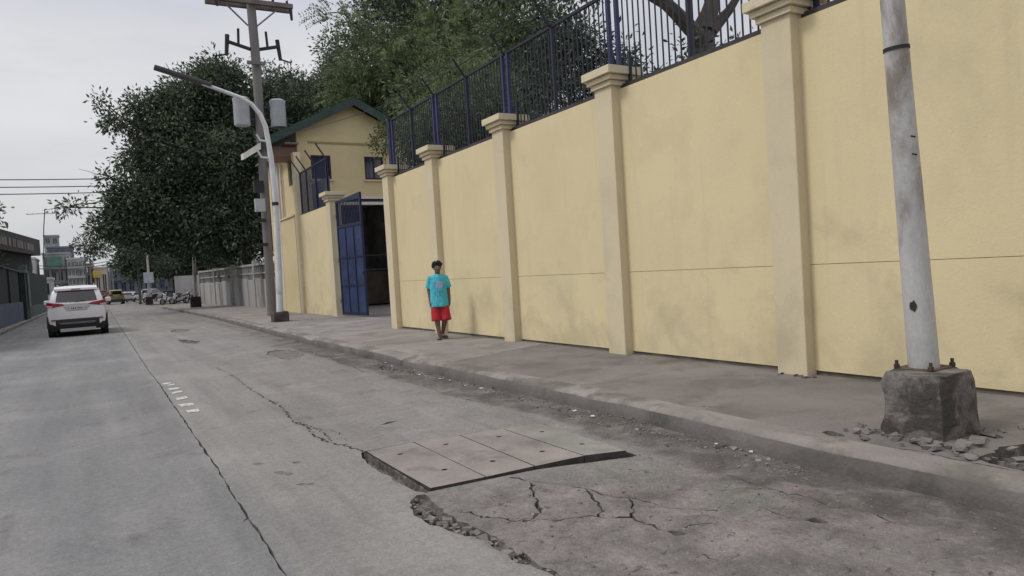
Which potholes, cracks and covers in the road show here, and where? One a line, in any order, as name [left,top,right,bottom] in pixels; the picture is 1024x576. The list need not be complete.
manhole cover [414,435,534,480]
pothole [410,495,560,576]
manhole cover [460,429,584,470]
crack [216,367,363,452]
manhole cover [504,424,626,463]
manhole cover [366,442,486,492]
crack [460,477,718,532]
